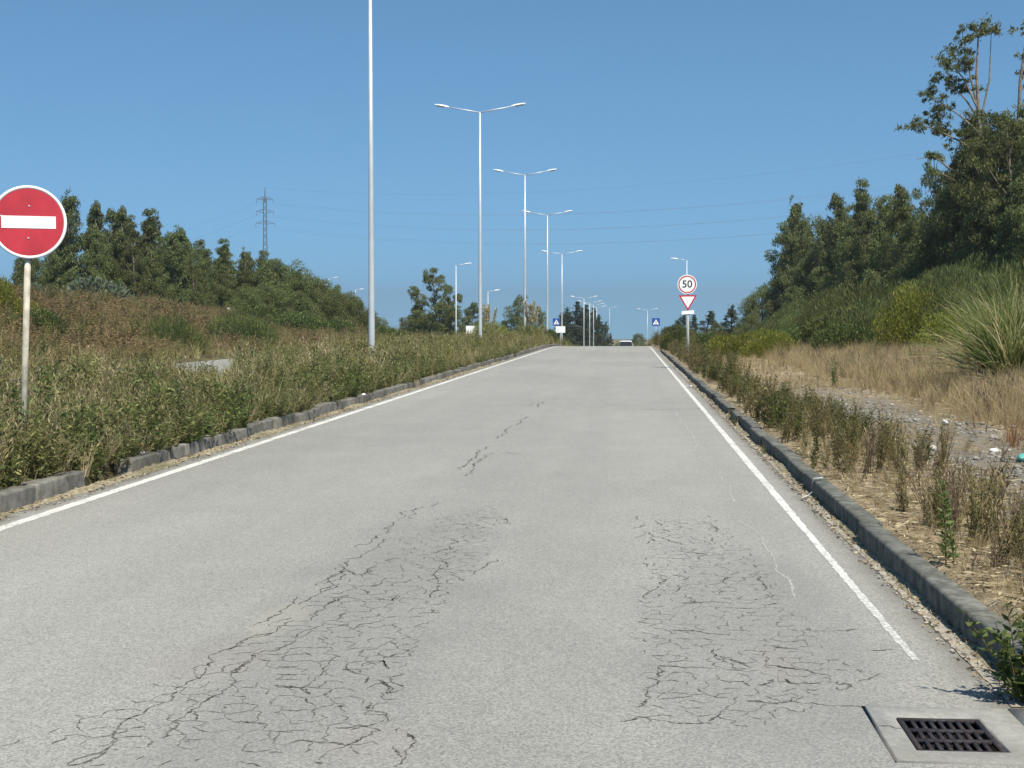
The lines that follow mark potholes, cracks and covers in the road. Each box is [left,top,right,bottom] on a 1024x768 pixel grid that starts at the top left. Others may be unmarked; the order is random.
drain grate [864,706,1024,766]
crack [457,402,543,476]
crack [9,503,508,767]
